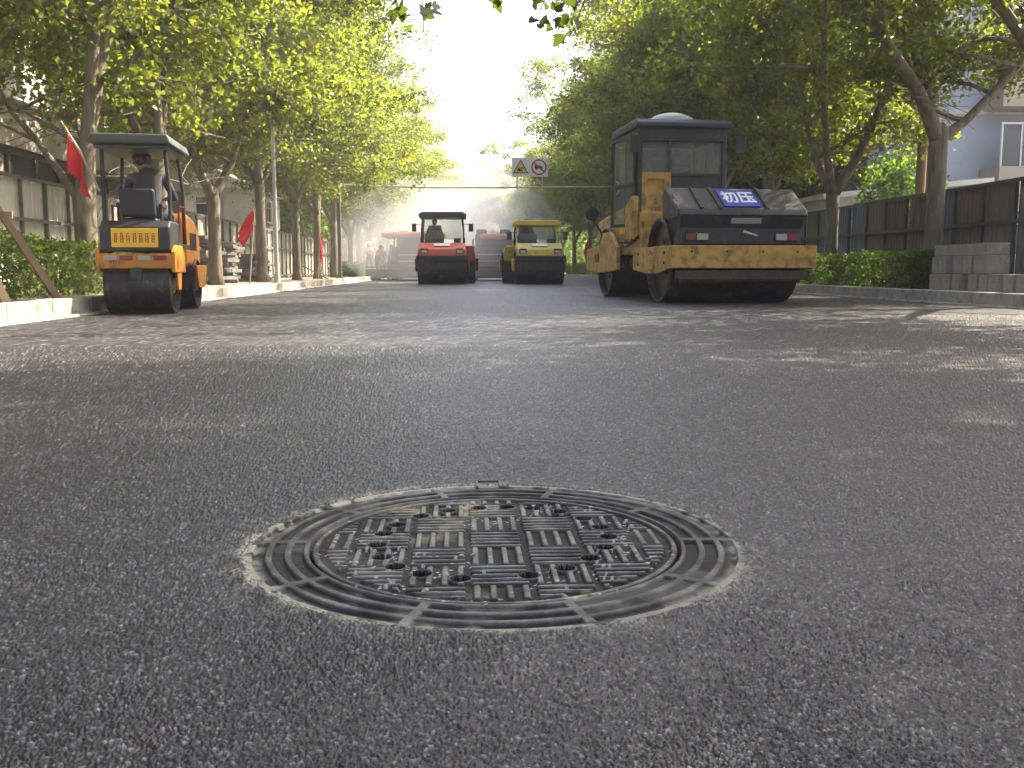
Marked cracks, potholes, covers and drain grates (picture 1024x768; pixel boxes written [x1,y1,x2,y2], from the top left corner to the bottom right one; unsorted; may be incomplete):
manhole cover [243,480,746,633]
